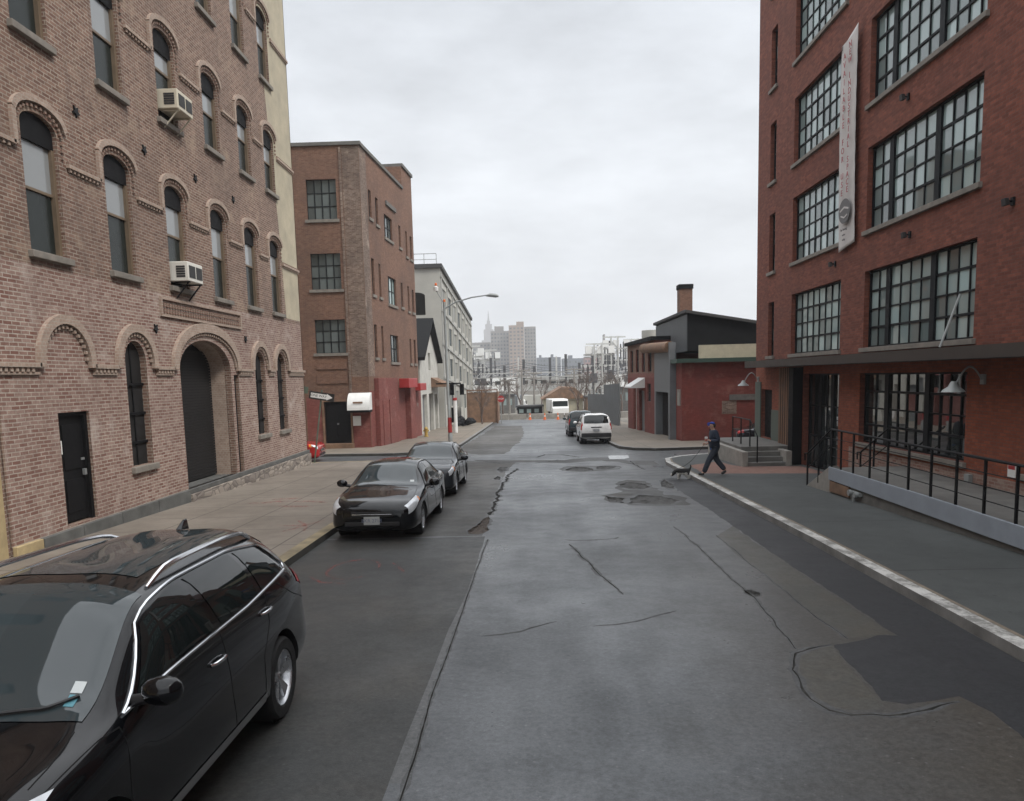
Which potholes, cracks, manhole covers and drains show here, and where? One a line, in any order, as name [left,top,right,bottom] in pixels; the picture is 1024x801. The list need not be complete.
crack [569,537,623,594]
pothole [630,495,679,504]
crack [674,527,960,716]
pothole [468,517,490,534]
